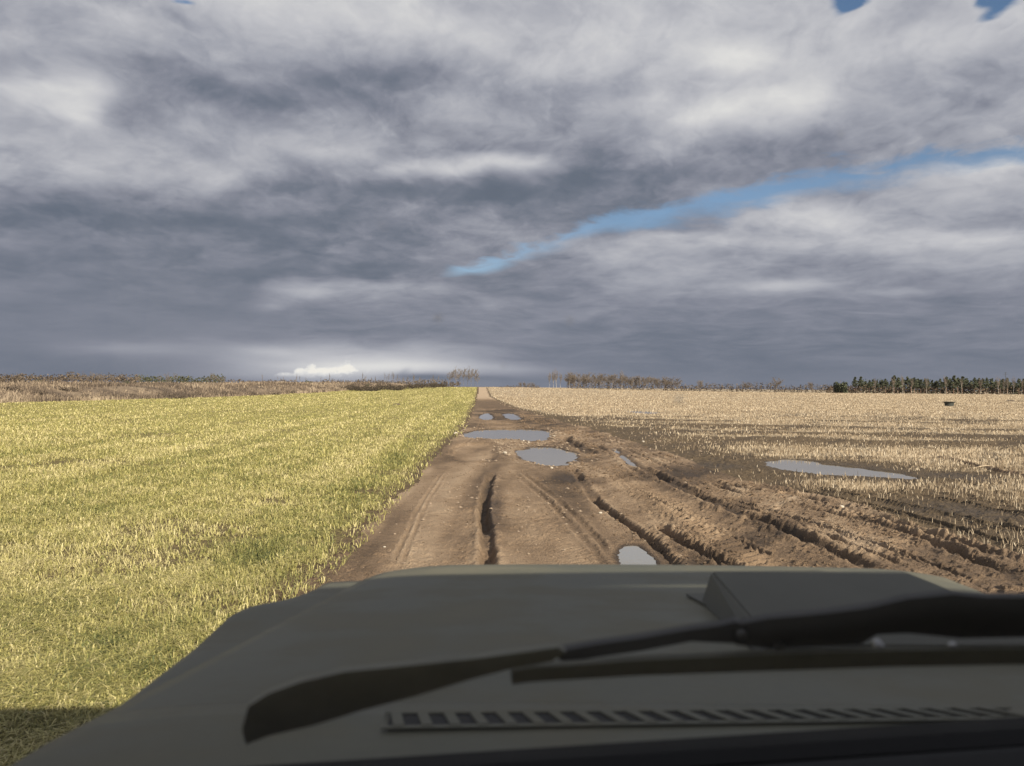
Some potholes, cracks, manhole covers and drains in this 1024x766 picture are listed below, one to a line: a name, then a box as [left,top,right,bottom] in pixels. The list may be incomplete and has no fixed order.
pothole [605,540,671,565]
pothole [458,428,558,441]
pothole [509,444,588,466]
